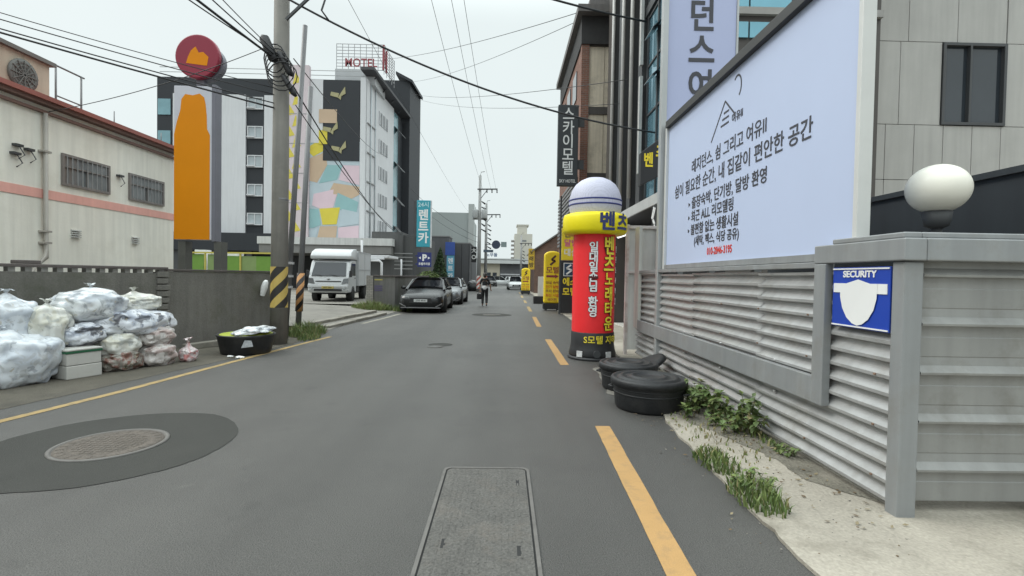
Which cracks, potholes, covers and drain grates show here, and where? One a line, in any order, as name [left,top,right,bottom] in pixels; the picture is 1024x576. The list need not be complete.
manhole cover [44,428,170,462]
manhole cover [410,467,543,576]
